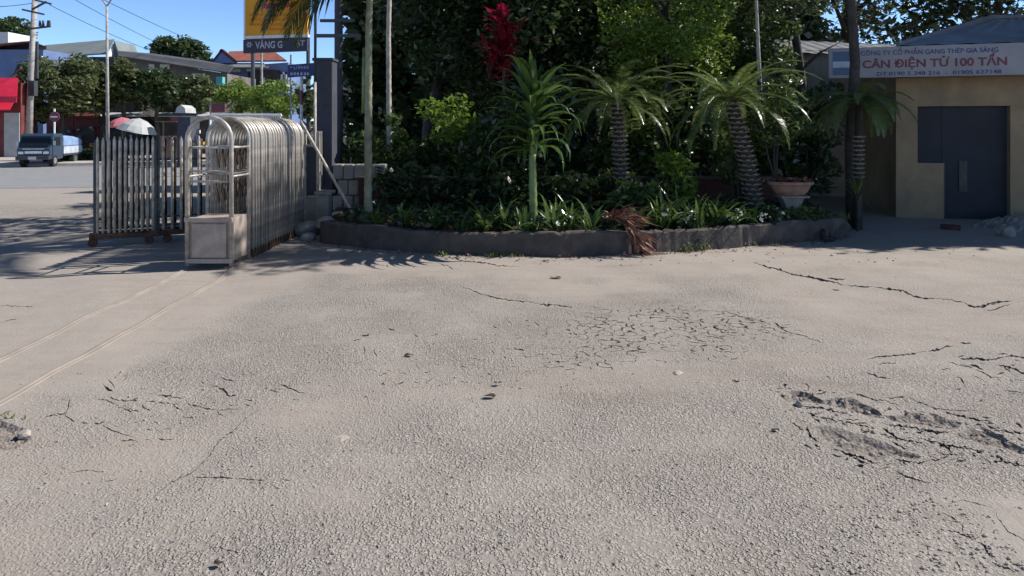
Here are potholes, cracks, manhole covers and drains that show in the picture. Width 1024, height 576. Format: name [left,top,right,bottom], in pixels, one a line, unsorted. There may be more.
crack [504,302,821,373]
crack [756,263,1010,311]
pothole [0,420,31,451]
crack [354,286,572,388]
crack [894,500,1023,572]
crack [776,342,1024,483]
crack [45,372,305,443]
